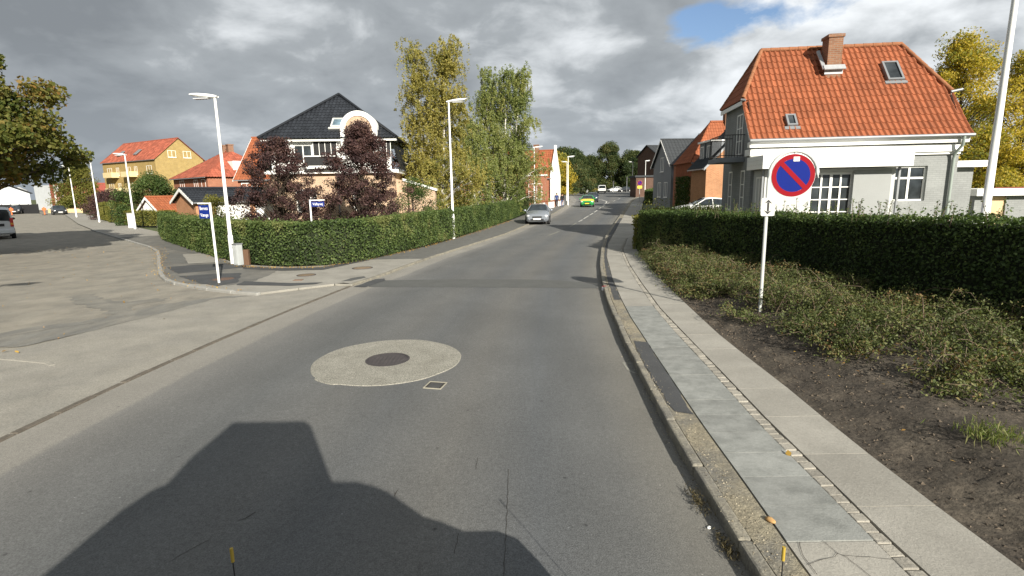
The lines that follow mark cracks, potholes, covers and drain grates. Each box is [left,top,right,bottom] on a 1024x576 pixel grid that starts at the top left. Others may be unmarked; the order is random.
crack [808,542,894,576]
